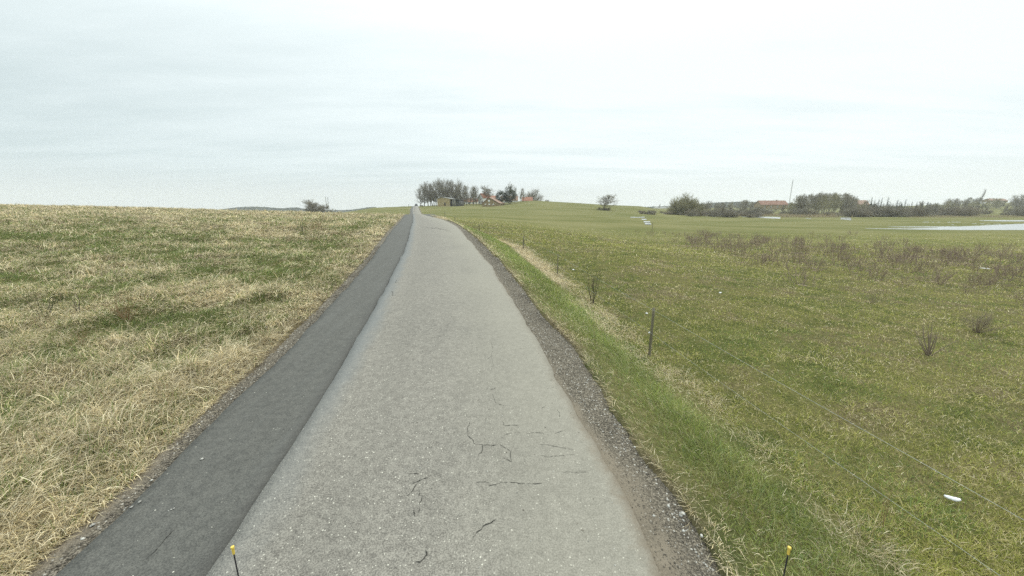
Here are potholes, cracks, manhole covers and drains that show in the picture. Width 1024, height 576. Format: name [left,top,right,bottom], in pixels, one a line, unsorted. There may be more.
crack [467,387,574,472]
